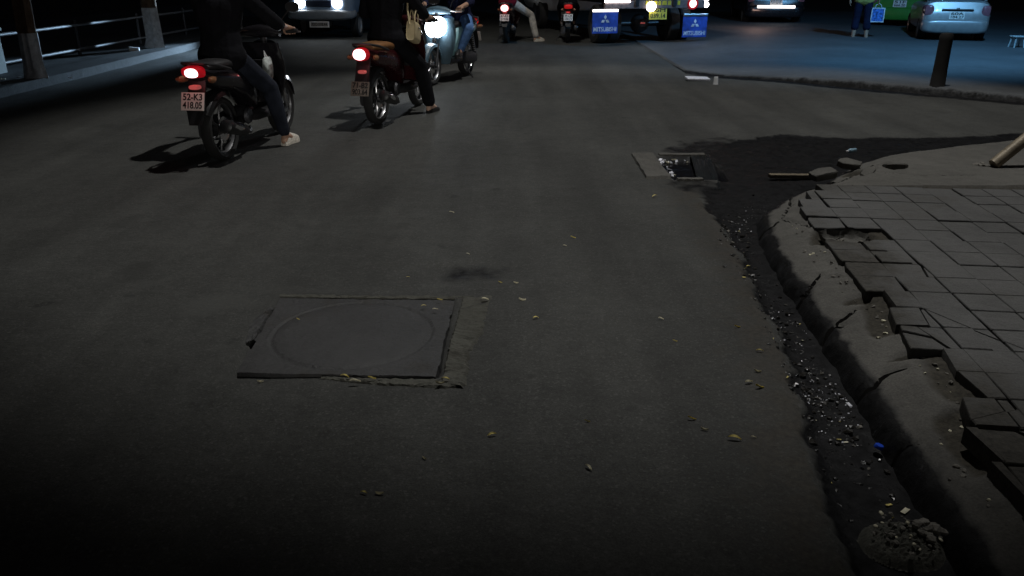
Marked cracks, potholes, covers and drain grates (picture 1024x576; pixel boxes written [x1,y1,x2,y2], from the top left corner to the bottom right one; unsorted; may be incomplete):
drain grate [631,152,727,190]
manhole cover [237,294,492,389]
pothole [818,229,871,244]
